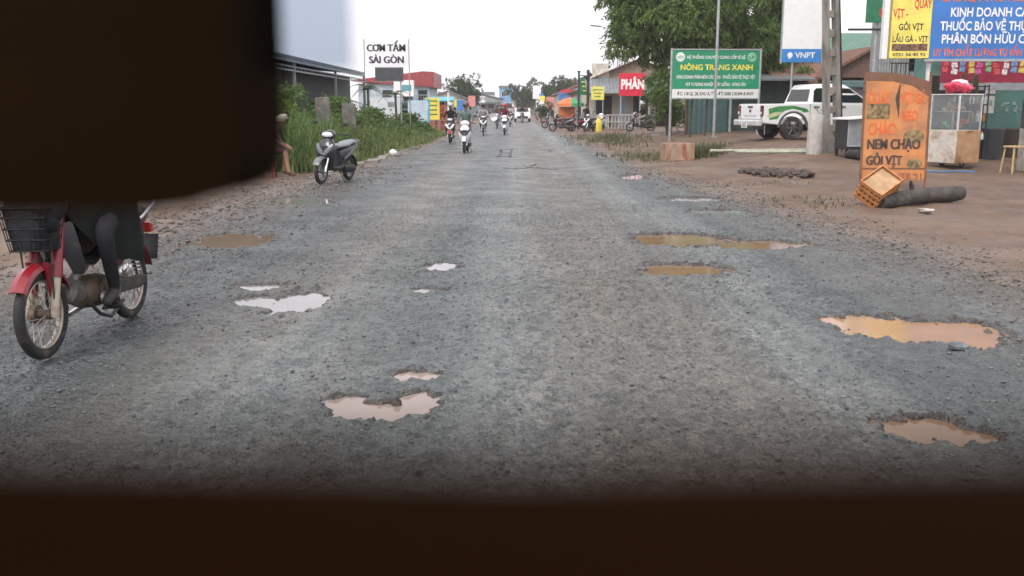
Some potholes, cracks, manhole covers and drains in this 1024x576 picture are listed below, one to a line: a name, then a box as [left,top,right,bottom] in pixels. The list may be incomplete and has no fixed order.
pothole [615,172,651,180]
pothole [218,281,339,317]
pothole [631,259,740,277]
pothole [316,364,449,423]
pothole [164,229,290,250]
pothole [419,261,466,271]
pothole [612,228,827,250]
pothole [810,310,1024,350]
pothole [856,407,999,434]
pothole [410,285,453,293]
crack [498,149,556,170]
